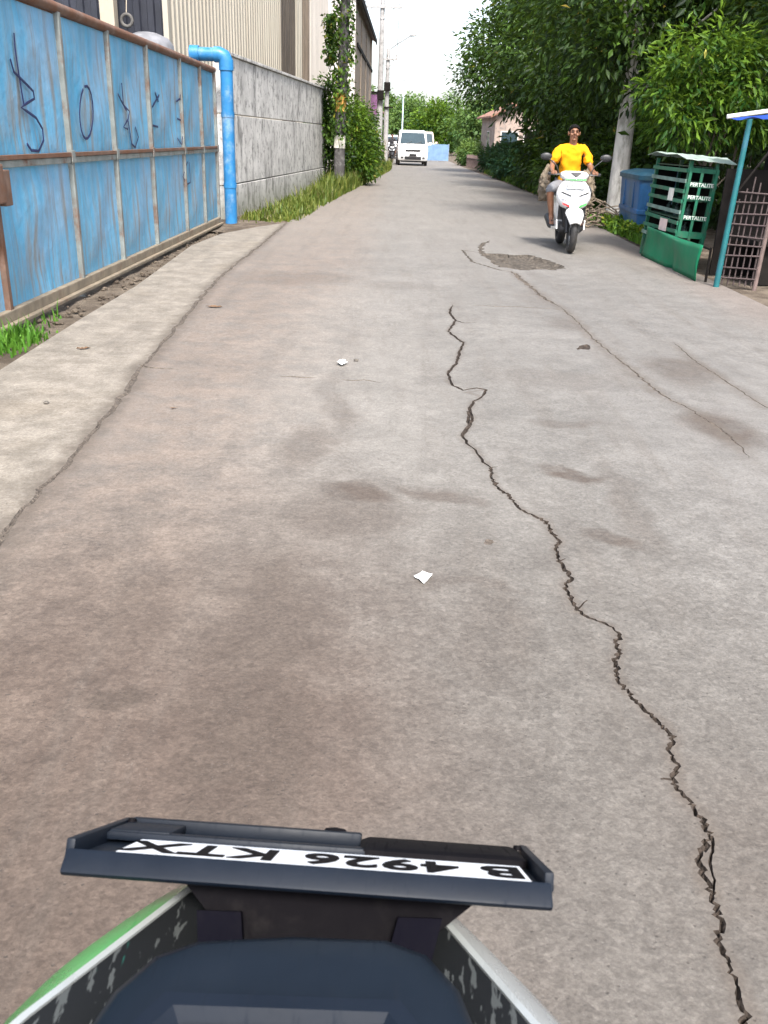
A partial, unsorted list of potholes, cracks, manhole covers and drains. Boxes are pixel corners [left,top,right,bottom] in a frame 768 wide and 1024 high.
pothole [461,241,565,273]
crack [447,271,768,1024]
